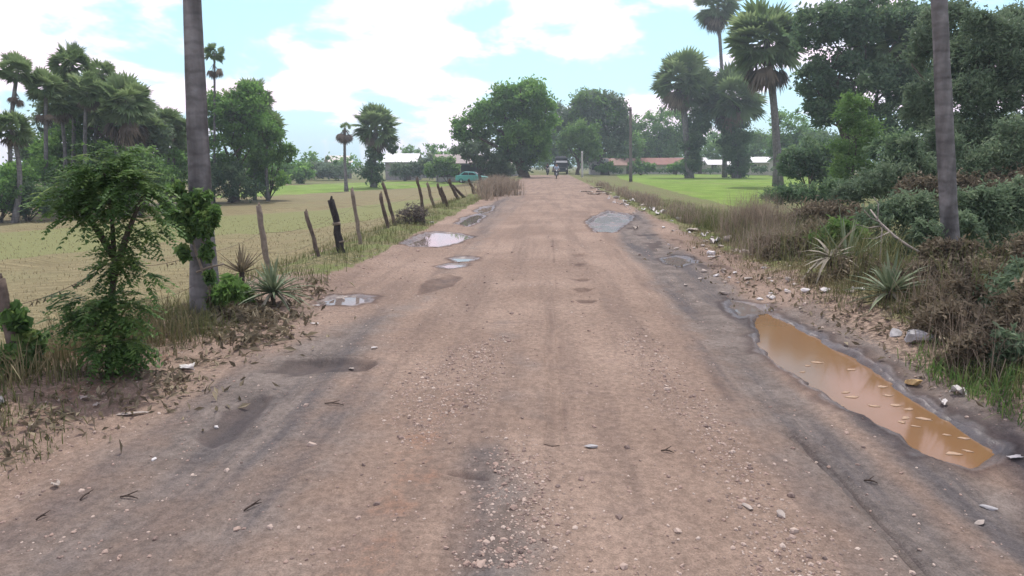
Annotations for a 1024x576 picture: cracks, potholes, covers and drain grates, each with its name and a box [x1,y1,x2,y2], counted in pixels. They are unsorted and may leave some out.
pothole [748,313,1006,473]
pothole [662,255,695,267]
pothole [722,297,771,320]
pothole [456,214,485,226]
pothole [400,231,473,247]
pothole [318,295,377,306]
pothole [474,206,494,214]
